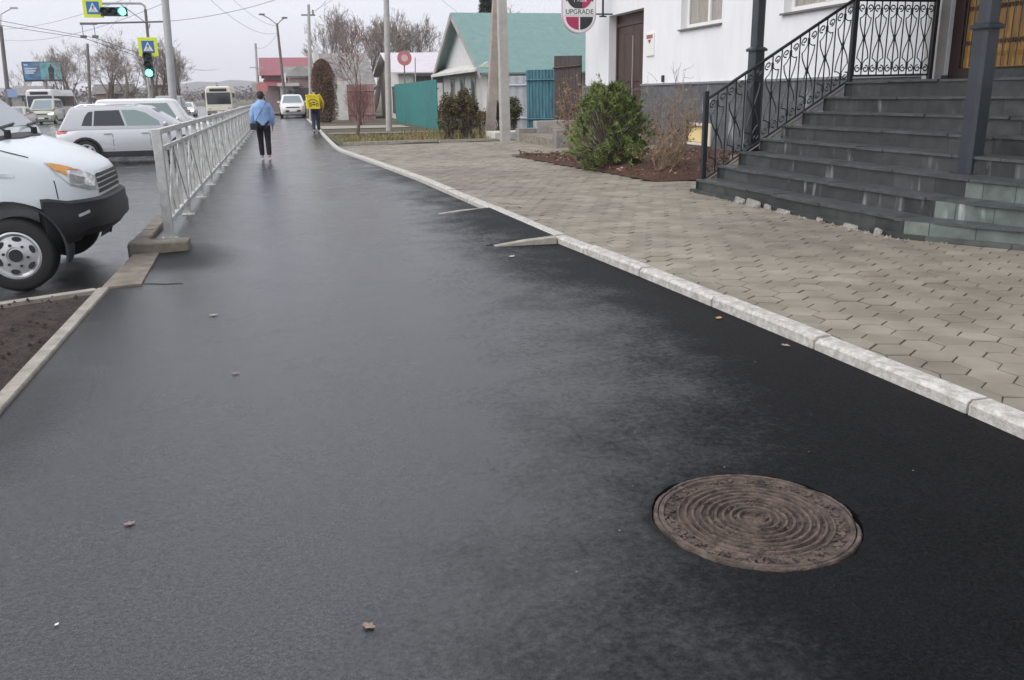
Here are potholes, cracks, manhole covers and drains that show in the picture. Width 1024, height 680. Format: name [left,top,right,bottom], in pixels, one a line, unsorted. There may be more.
manhole cover [653,474,863,573]
